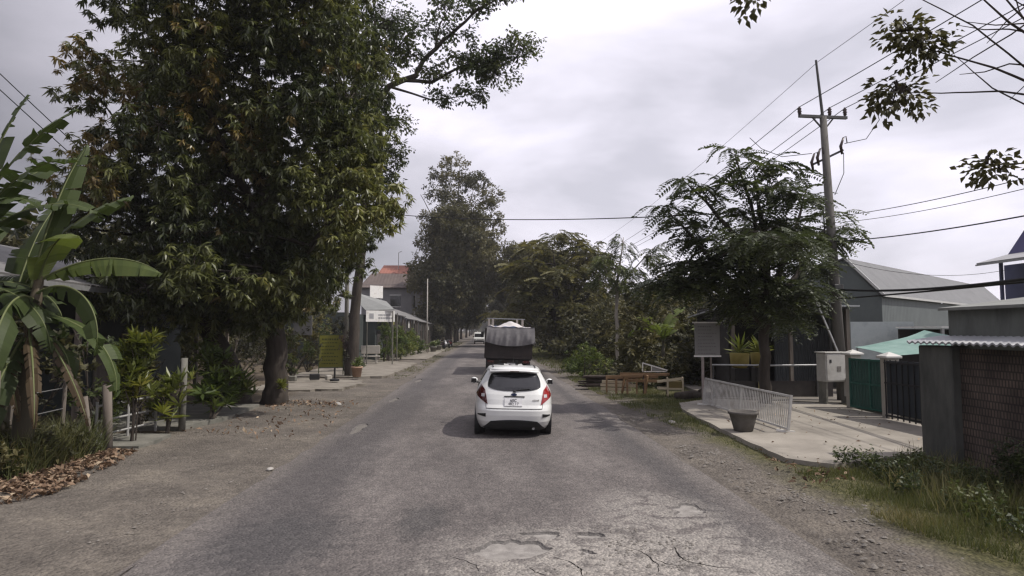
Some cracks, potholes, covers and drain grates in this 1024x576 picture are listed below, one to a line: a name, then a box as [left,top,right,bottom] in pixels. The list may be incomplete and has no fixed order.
crack [613,543,733,572]
pothole [469,539,553,561]
pothole [518,531,560,541]
pothole [668,503,707,517]
